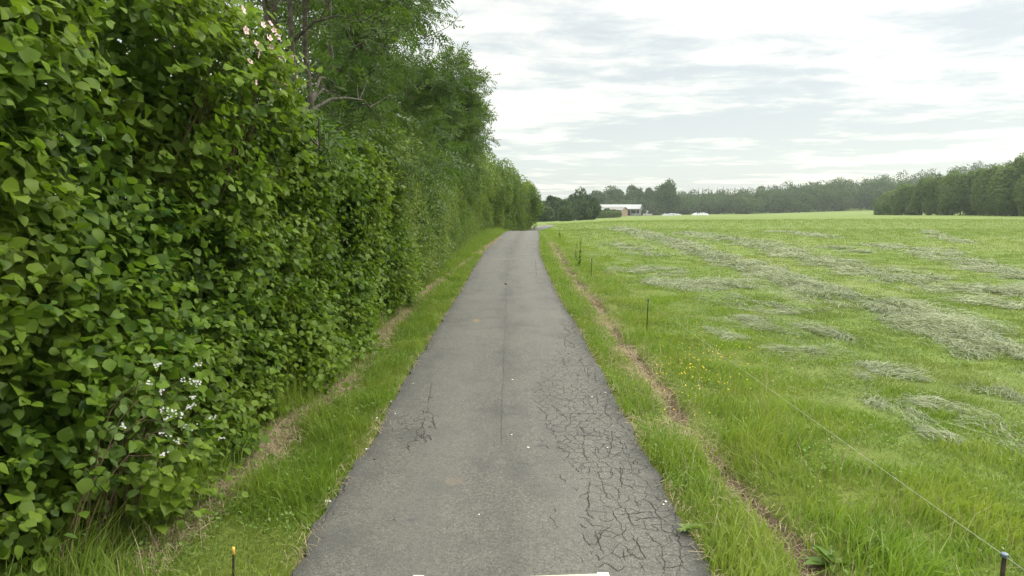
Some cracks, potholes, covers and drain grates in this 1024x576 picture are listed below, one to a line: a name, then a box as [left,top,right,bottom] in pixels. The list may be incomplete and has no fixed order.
crack [392,383,452,452]
crack [531,327,696,573]
